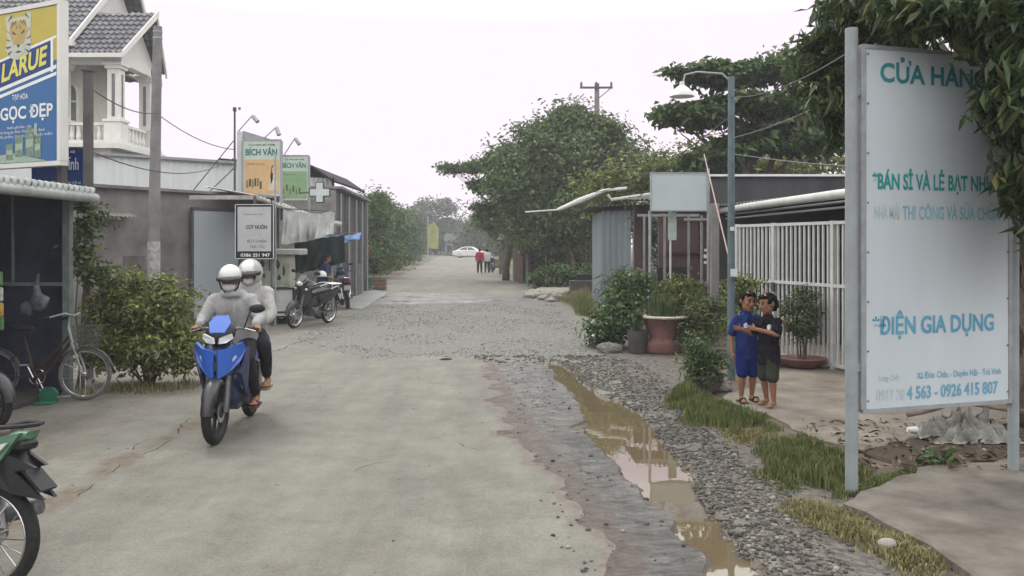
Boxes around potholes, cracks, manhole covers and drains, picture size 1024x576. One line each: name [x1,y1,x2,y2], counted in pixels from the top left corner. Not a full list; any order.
crack [77,418,191,497]
pothole [482,361,706,576]
